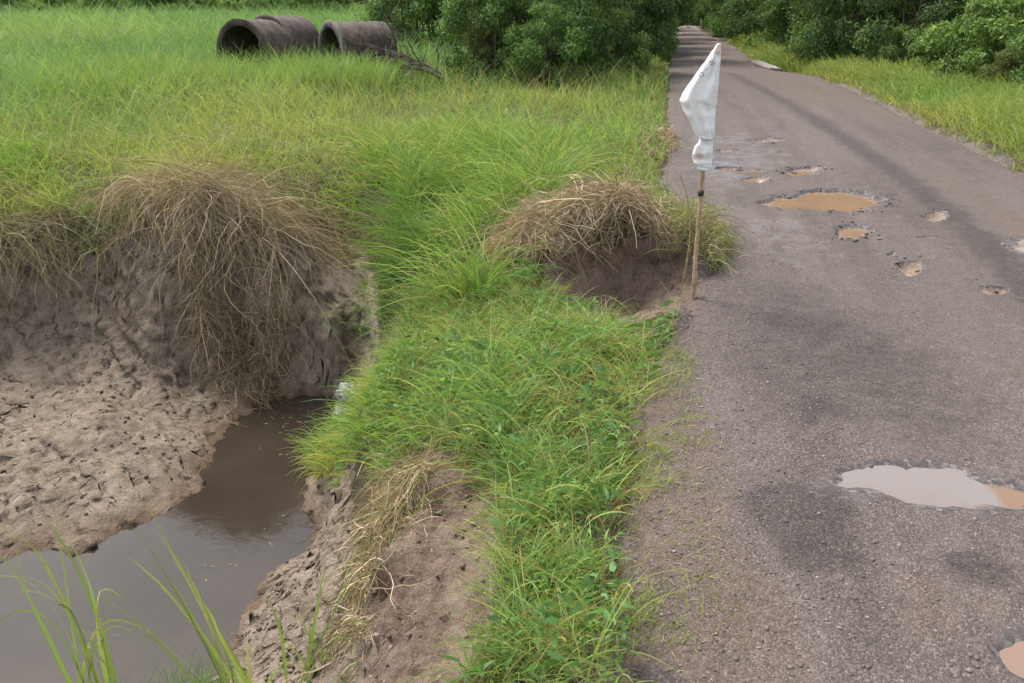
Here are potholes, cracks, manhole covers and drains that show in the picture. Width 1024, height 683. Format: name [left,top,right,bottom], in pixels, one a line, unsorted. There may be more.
pothole [919,208,962,223]
pothole [775,164,833,177]
pothole [823,458,1024,516]
pothole [831,220,882,242]
pothole [891,254,936,277]
pothole [986,624,1024,678]
pothole [977,284,1010,295]
pothole [755,186,894,215]
pothole [1000,237,1024,256]
